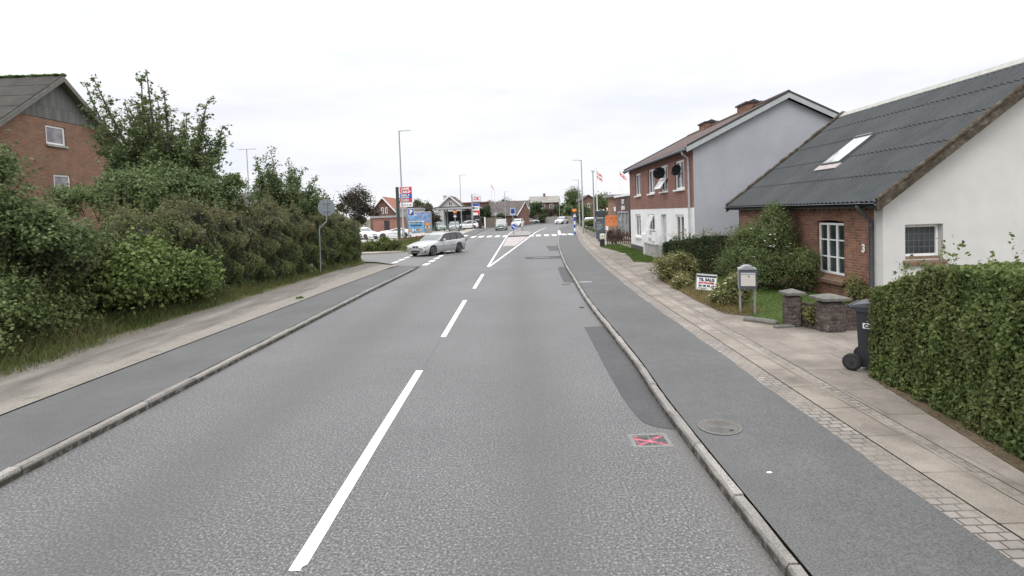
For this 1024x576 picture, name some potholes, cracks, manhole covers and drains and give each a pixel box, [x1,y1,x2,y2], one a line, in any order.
manhole cover [698,419,742,435]
drain grate [627,433,674,448]
